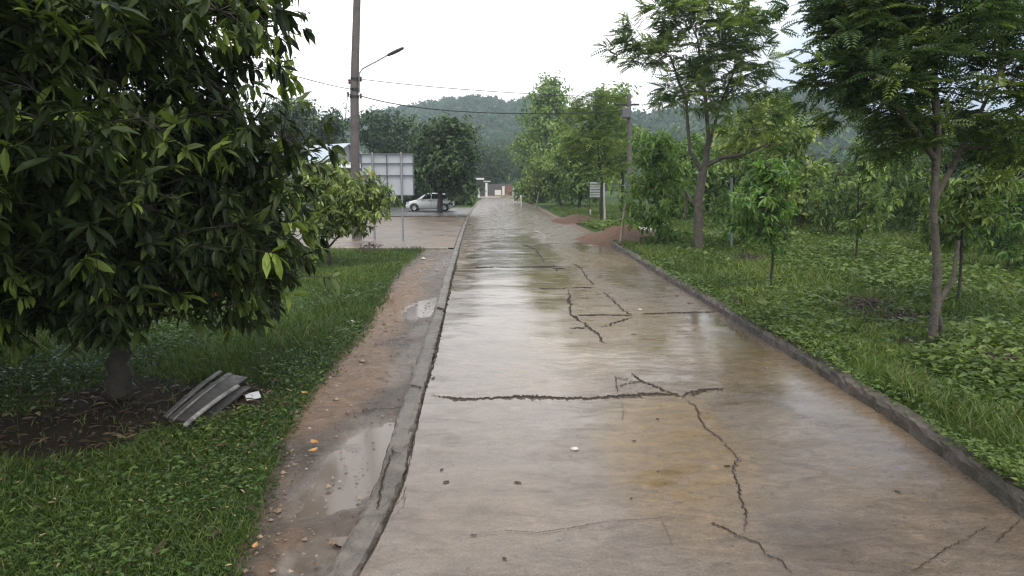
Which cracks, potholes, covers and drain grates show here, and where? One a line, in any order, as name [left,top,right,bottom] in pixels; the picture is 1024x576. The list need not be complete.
crack [363,252,792,573]
crack [909,519,1020,573]
